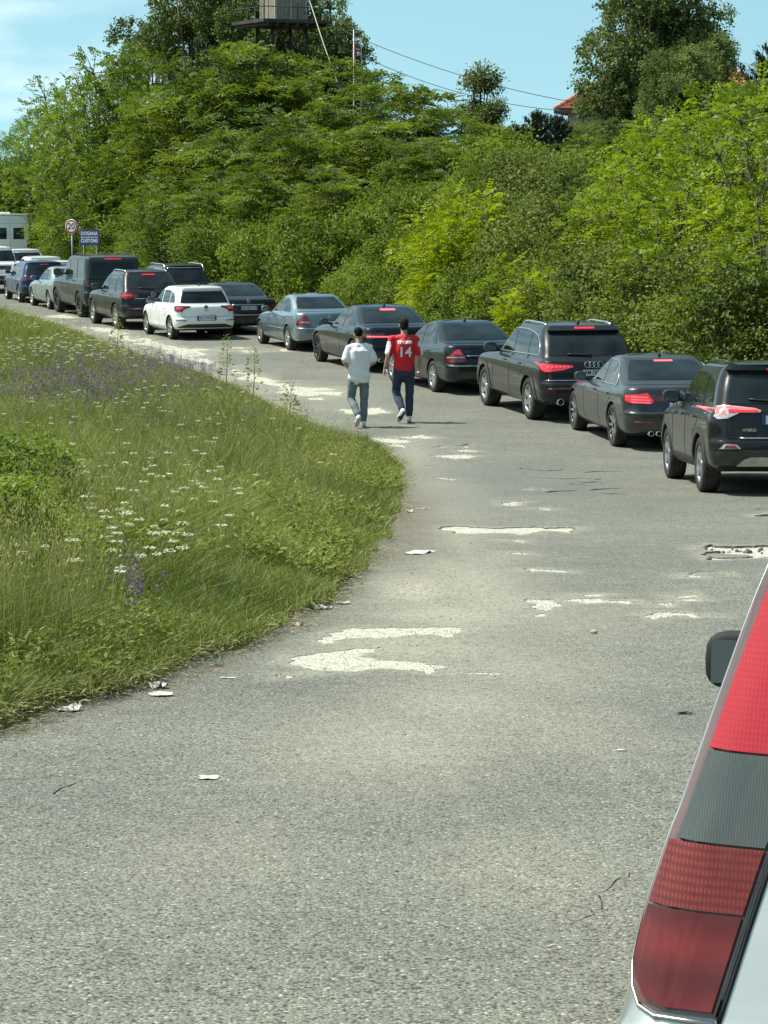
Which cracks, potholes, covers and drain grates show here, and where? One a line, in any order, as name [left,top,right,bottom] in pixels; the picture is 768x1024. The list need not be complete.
crack [581,872,643,920]
pothole [694,544,768,560]
crack [520,468,622,494]
